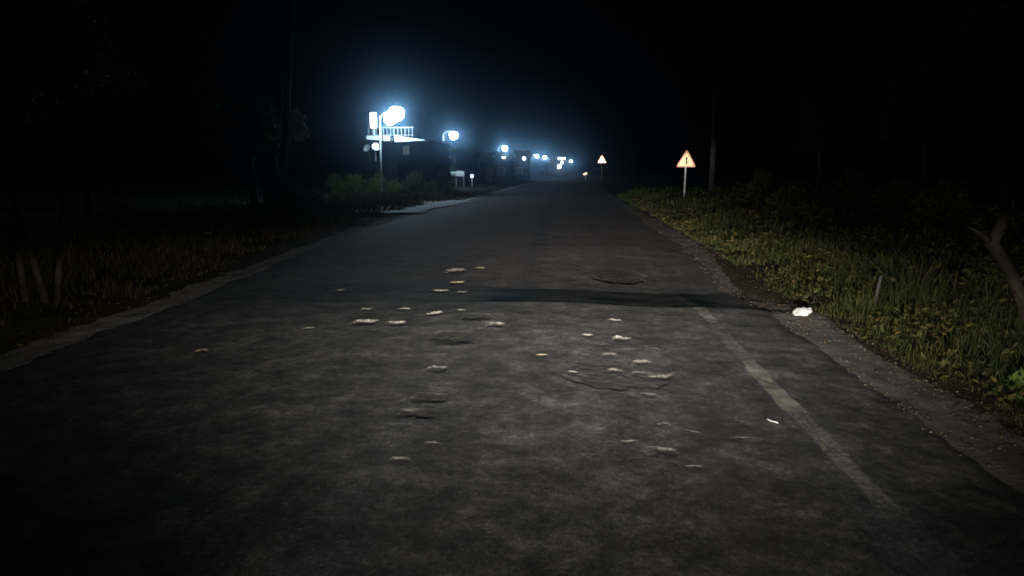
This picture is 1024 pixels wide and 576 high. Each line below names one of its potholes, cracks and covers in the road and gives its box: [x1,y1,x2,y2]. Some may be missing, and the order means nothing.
pothole [581,267,651,286]
pothole [396,387,464,410]
pothole [412,328,491,348]
pothole [450,311,502,324]
pothole [549,343,683,395]
pothole [382,402,452,428]
